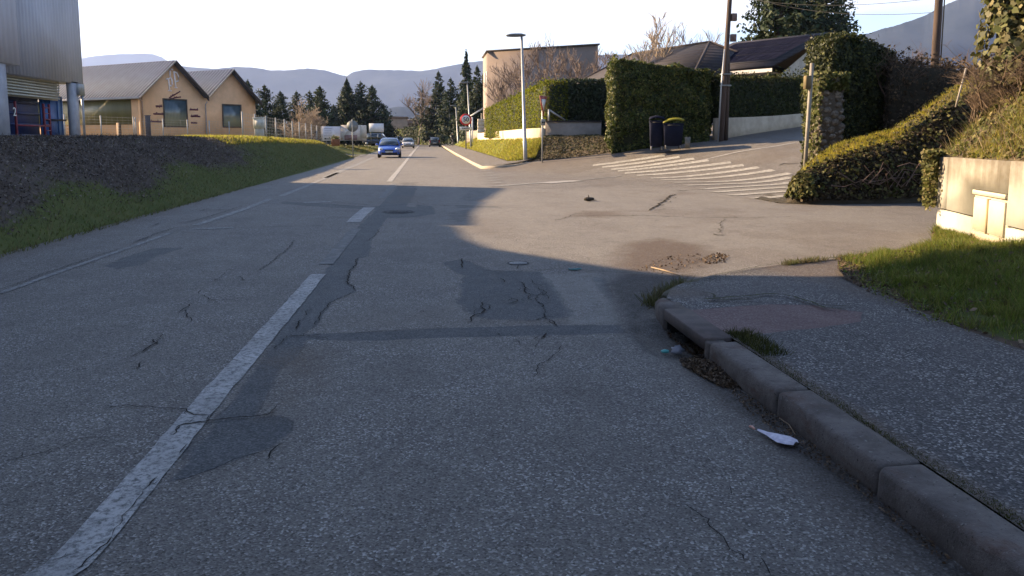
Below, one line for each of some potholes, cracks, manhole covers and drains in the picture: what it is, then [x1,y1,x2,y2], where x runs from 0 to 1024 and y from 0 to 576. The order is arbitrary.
crack [274,258,361,349]
crack [555,187,790,235]
crack [470,266,562,377]
crack [685,504,771,575]
